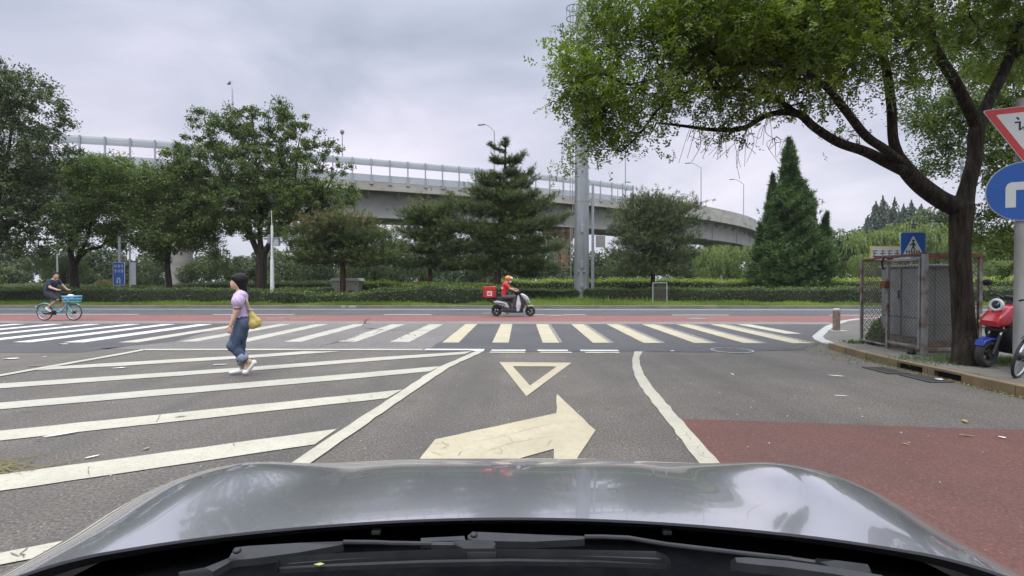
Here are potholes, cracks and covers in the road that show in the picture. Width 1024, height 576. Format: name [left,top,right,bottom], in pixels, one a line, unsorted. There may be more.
drain grate [899,374,955,383]
